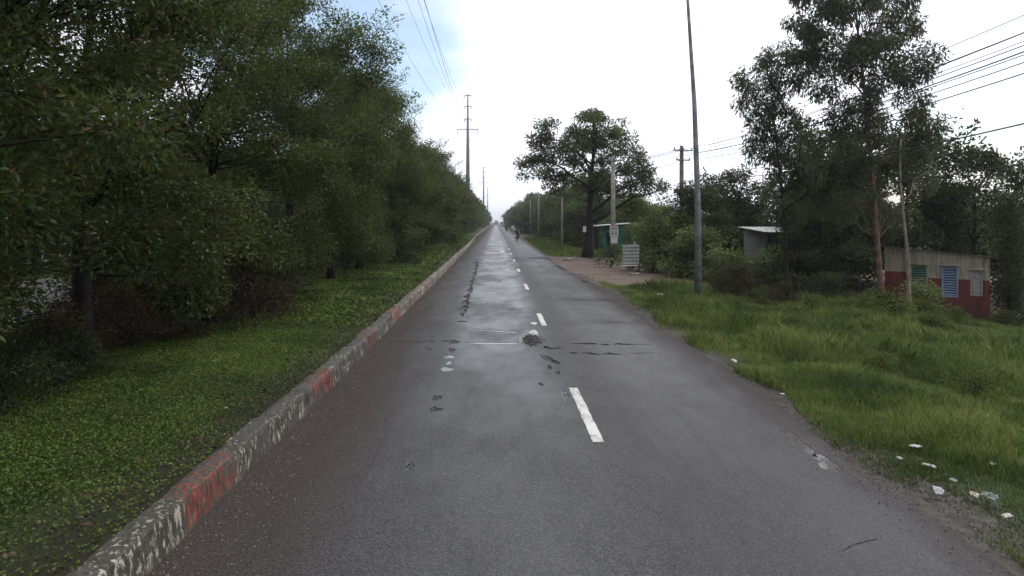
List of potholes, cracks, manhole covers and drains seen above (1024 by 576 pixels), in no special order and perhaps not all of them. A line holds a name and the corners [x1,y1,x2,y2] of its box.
crack [457,262,519,344]
crack [543,343,652,355]
crack [843,539,877,551]
pothole [518,329,547,348]
